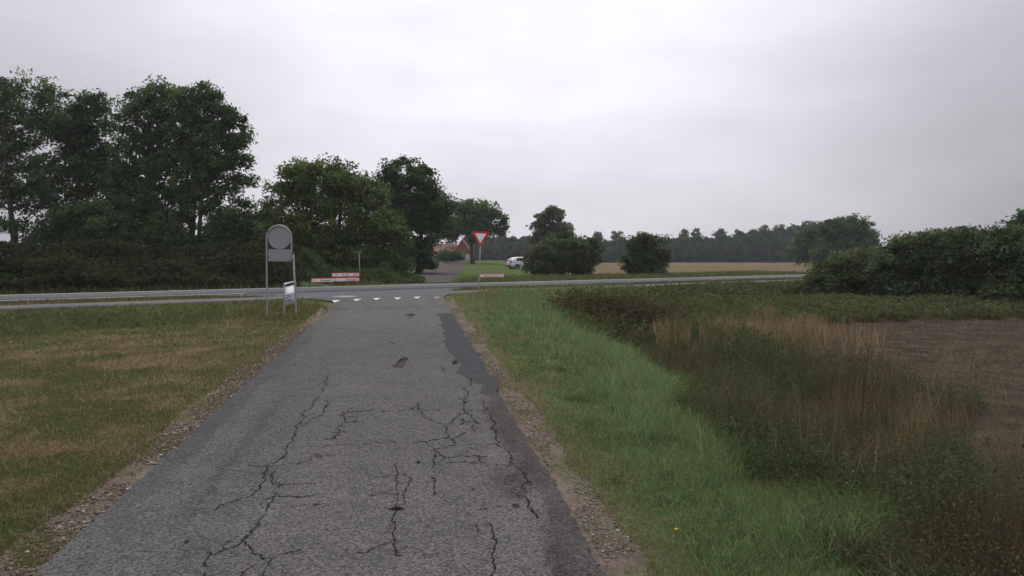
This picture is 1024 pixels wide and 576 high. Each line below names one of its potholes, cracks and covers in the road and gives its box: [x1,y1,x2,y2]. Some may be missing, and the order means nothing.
crack [202,375,540,576]
